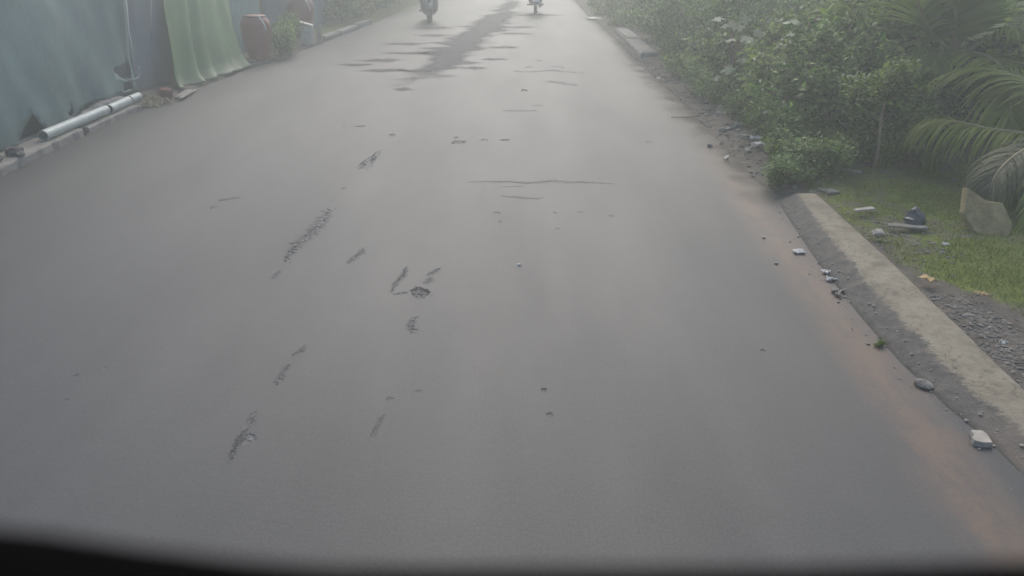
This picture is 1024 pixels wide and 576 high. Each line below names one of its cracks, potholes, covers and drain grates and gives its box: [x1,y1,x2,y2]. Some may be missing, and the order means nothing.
crack [346,247,367,264]
crack [270,187,345,280]
crack [273,345,305,386]
crack [370,397,395,440]
crack [468,179,611,200]
pothole [407,286,430,299]
crack [226,410,258,464]
